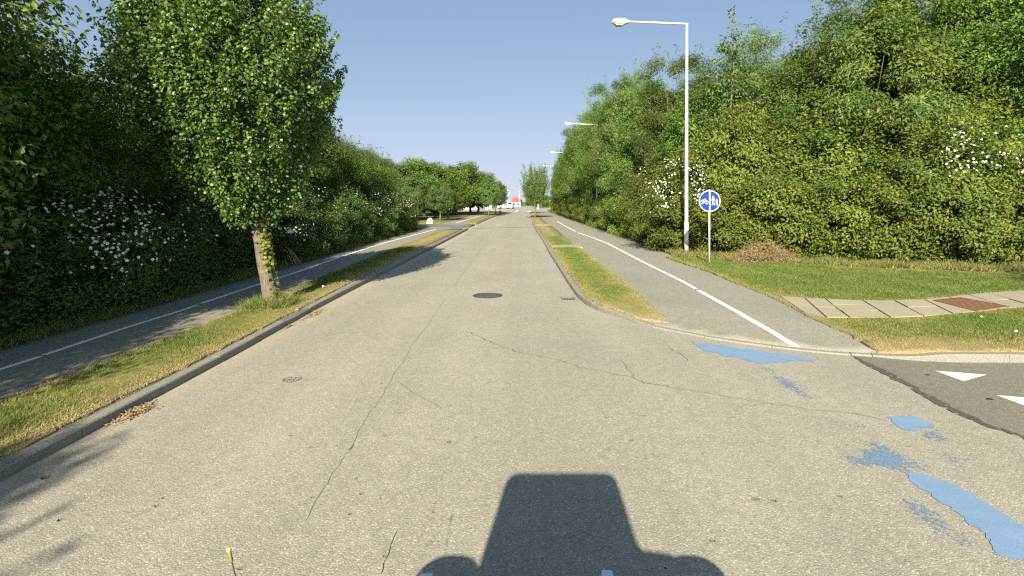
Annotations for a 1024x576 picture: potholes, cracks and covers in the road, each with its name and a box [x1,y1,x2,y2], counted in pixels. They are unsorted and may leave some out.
crack [306,238,491,520]
crack [463,331,886,421]
